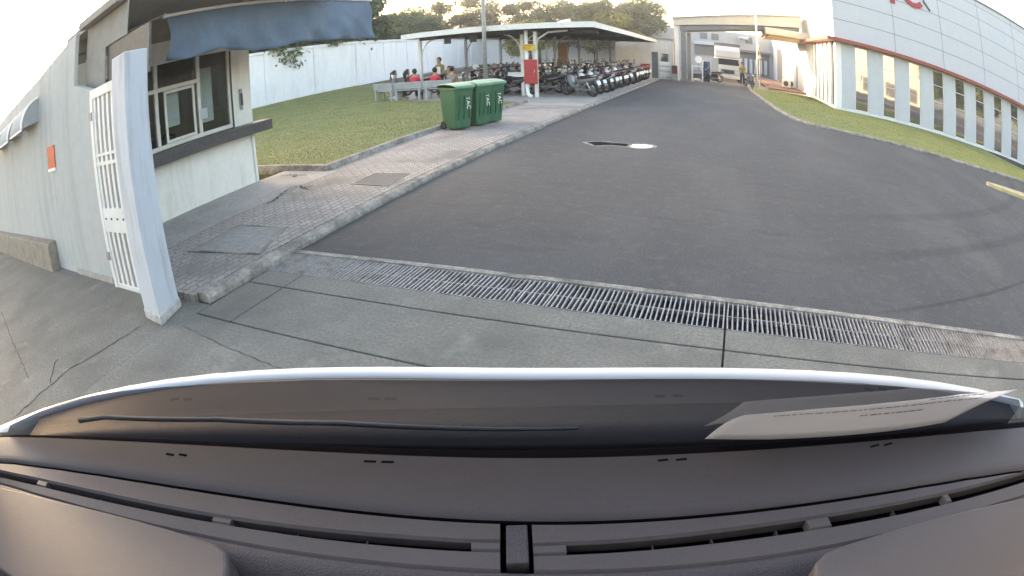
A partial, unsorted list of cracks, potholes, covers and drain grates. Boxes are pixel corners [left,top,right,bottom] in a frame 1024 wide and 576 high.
crack [267,174,309,204]
drain grate [1003,338,1024,363]
manhole cover [187,225,287,255]
manhole cover [352,173,410,187]
drain grate [545,283,725,330]
drain grate [726,303,902,351]
drain grate [891,323,1016,362]
drain grate [360,263,561,308]
crack [1,312,140,417]
